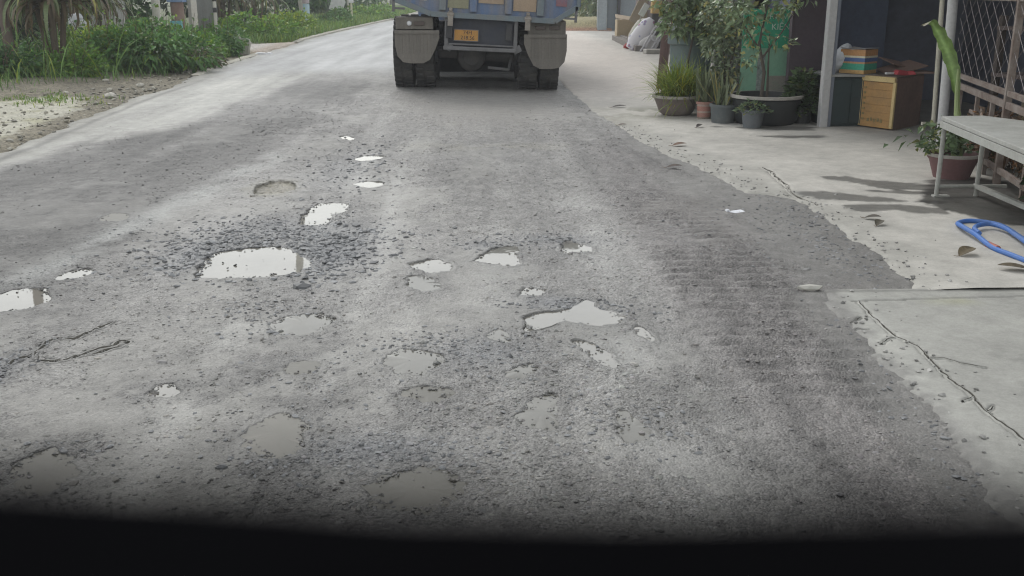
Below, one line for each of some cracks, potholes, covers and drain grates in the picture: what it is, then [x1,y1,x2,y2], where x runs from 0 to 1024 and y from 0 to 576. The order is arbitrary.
pothole [49,265,102,282]
crack [761,167,818,206]
crack [0,320,133,371]
pothole [515,298,634,335]
pothole [0,286,61,314]
pothole [554,238,599,255]
pothole [354,461,481,488]
pothole [248,179,302,197]
pothole [295,202,353,227]
pothole [135,380,190,402]
crack [850,301,1024,442]
pothole [229,408,324,464]
